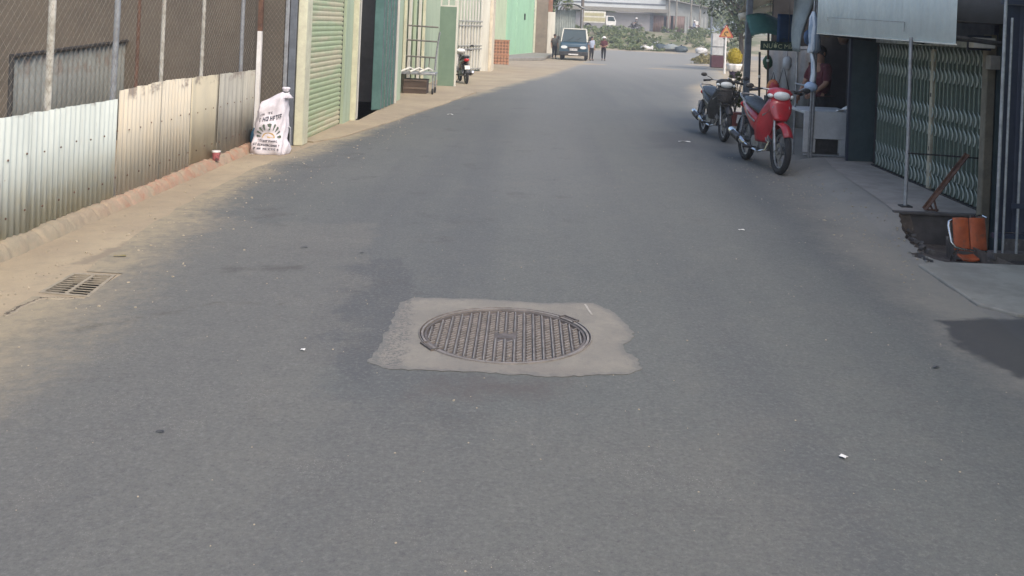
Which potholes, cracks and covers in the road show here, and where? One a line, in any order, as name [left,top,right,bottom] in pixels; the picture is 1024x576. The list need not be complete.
crack [3,296,75,317]
drain grate [38,273,116,297]
manhole cover [419,307,592,365]
